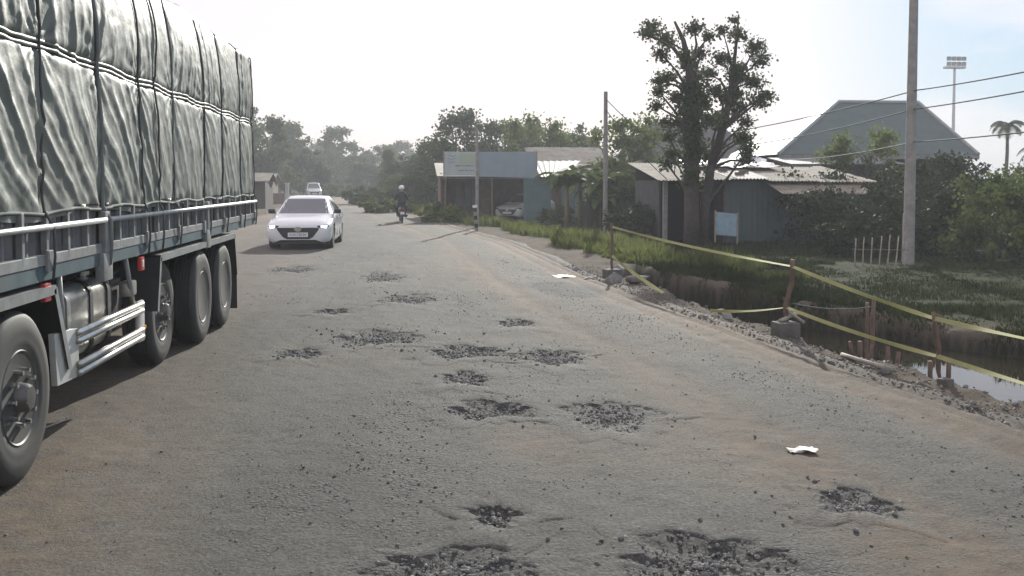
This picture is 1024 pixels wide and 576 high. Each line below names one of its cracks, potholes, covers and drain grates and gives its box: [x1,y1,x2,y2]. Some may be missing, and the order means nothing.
pothole [496,392,709,447]
pothole [417,392,564,430]
pothole [238,263,336,277]
pothole [291,529,588,576]
pothole [482,344,611,377]
pothole [346,290,462,311]
pothole [281,305,371,321]
